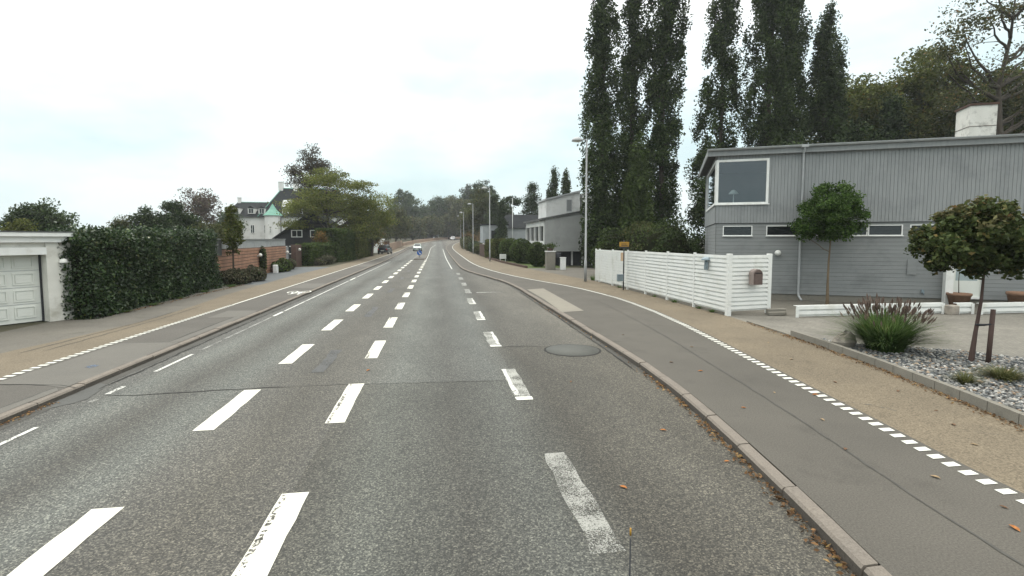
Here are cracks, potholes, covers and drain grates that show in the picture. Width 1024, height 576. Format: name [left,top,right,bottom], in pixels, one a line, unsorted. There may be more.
manhole cover [544,344,601,356]
